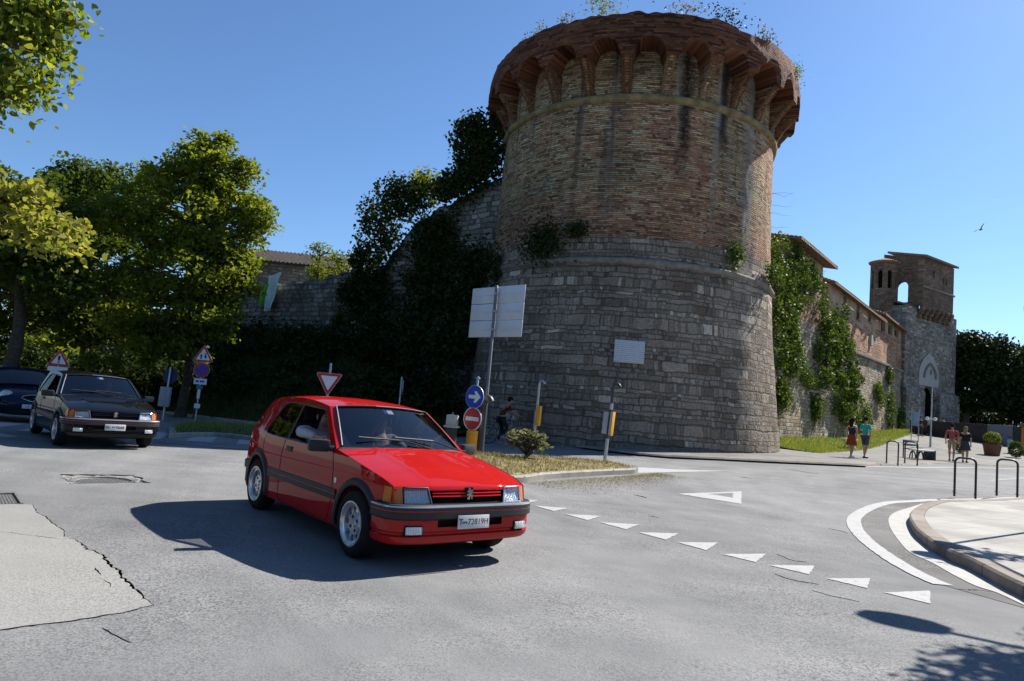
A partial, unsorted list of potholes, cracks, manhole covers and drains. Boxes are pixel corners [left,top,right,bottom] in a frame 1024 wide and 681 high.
manhole cover [61,474,150,484]
crack [0,506,154,643]
crack [775,554,859,602]
drain grate [0,492,24,504]
